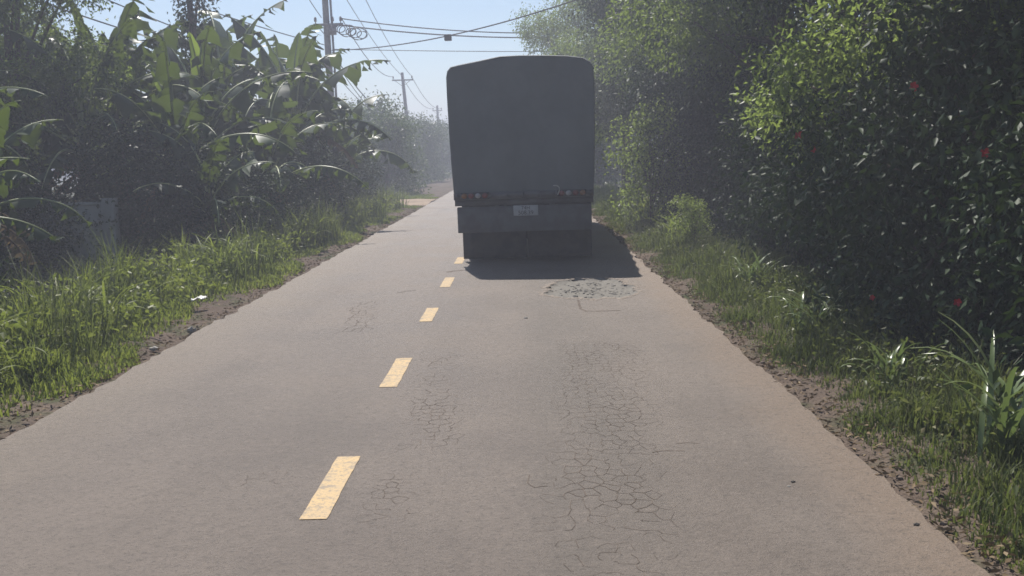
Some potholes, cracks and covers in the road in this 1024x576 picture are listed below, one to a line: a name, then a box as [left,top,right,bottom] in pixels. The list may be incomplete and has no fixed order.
crack [335,290,415,334]
crack [393,356,465,453]
crack [358,474,430,527]
crack [535,341,680,576]
